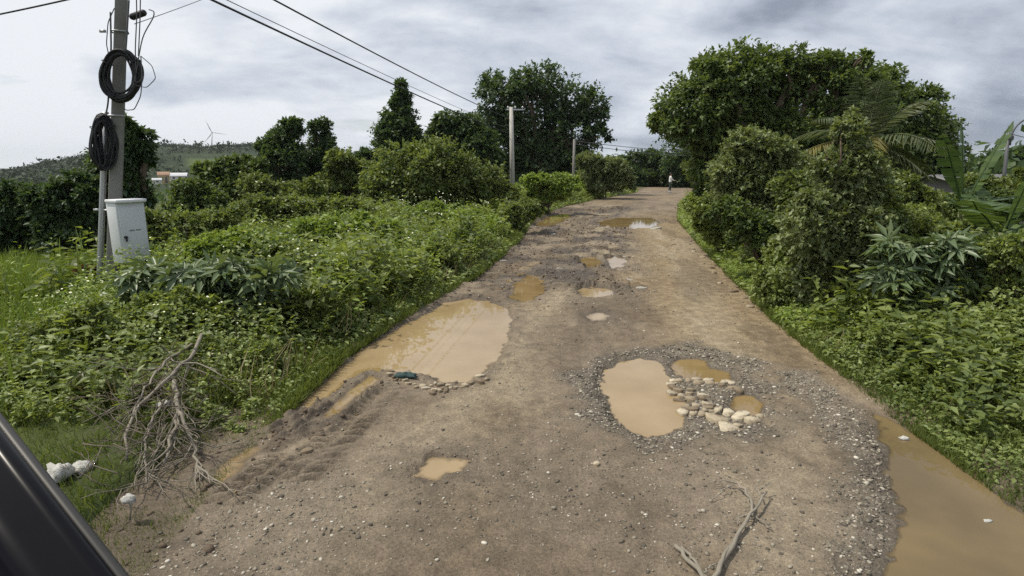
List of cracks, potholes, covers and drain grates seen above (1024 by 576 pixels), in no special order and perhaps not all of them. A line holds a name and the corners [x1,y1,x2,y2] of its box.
pothole [497,269,558,303]
pothole [576,308,620,322]
pothole [592,215,666,229]
pothole [578,343,792,448]
pothole [570,281,625,298]
pothole [275,293,524,414]
pothole [573,252,636,270]
